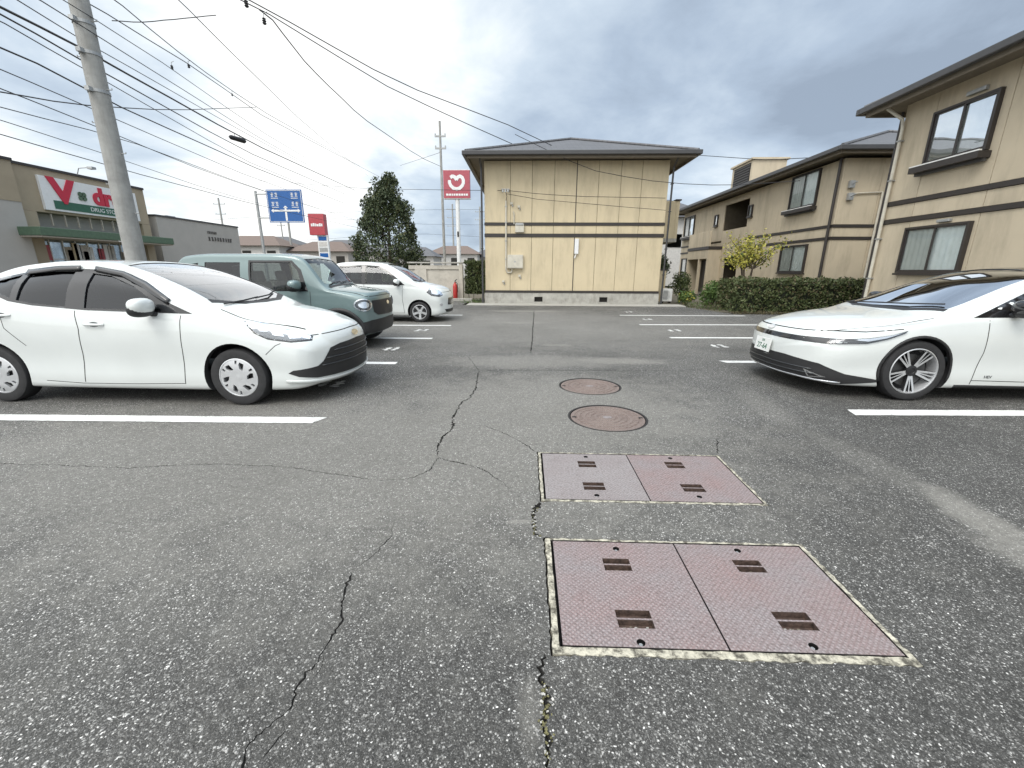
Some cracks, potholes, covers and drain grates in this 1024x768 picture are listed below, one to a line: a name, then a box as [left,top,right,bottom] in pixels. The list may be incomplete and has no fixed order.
manhole cover [543,538,923,667]
crack [1,358,509,490]
manhole cover [537,452,769,506]
crack [531,502,541,536]
crack [241,527,393,768]
manhole cover [559,378,622,395]
manhole cover [568,405,648,432]
crack [536,654,555,768]
